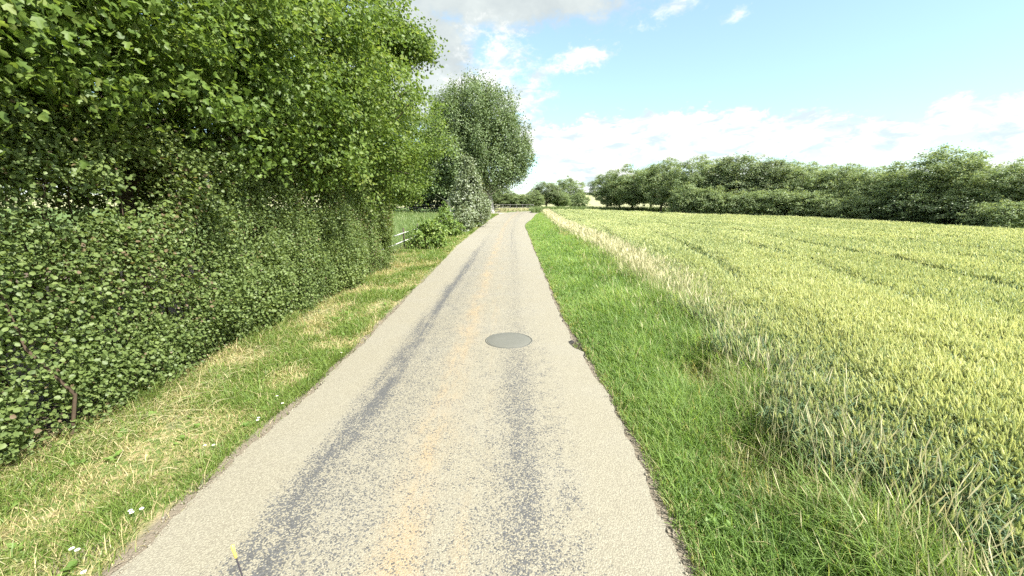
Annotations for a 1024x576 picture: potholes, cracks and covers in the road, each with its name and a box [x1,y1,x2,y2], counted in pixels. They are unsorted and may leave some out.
manhole cover [485,332,532,349]
